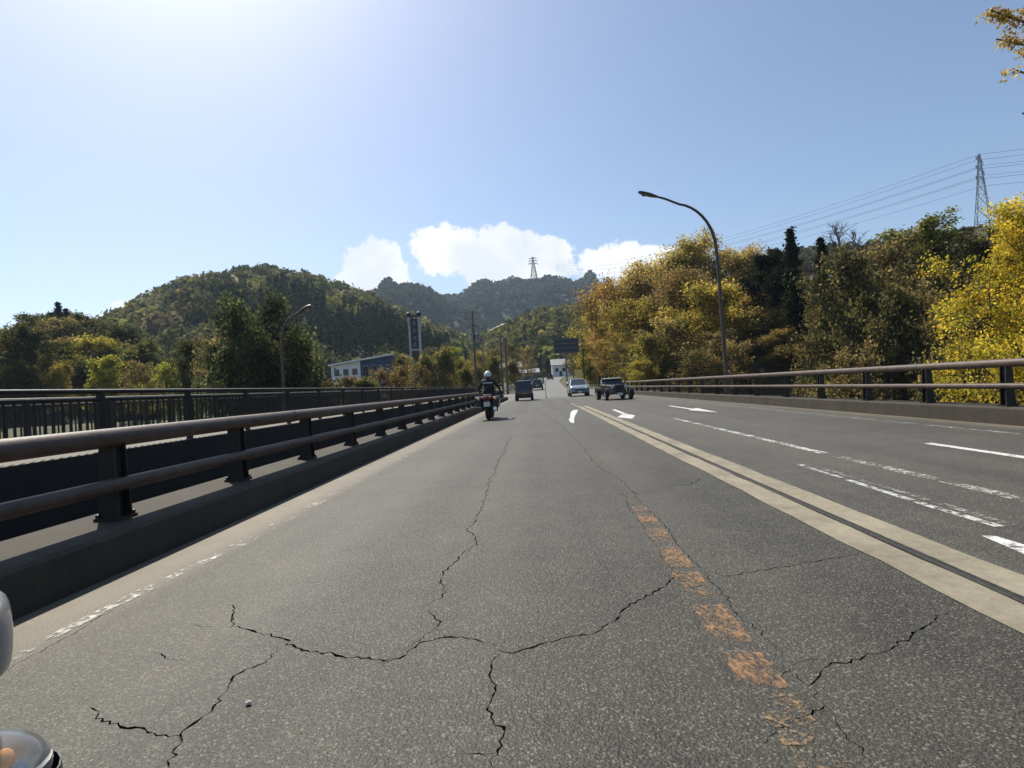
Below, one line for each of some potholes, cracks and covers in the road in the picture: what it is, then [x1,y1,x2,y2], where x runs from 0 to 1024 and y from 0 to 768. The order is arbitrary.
crack [543,413,946,768]
crack [90,440,679,768]
